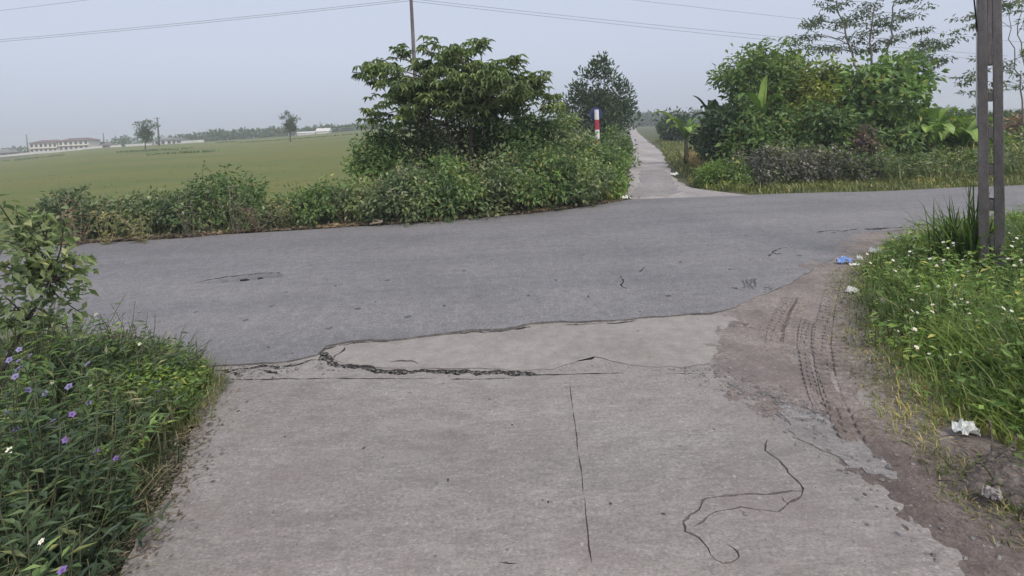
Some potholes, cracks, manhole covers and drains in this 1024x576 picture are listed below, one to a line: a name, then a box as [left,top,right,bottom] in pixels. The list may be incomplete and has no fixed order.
crack [570,387,592,562]
crack [682,441,804,564]
